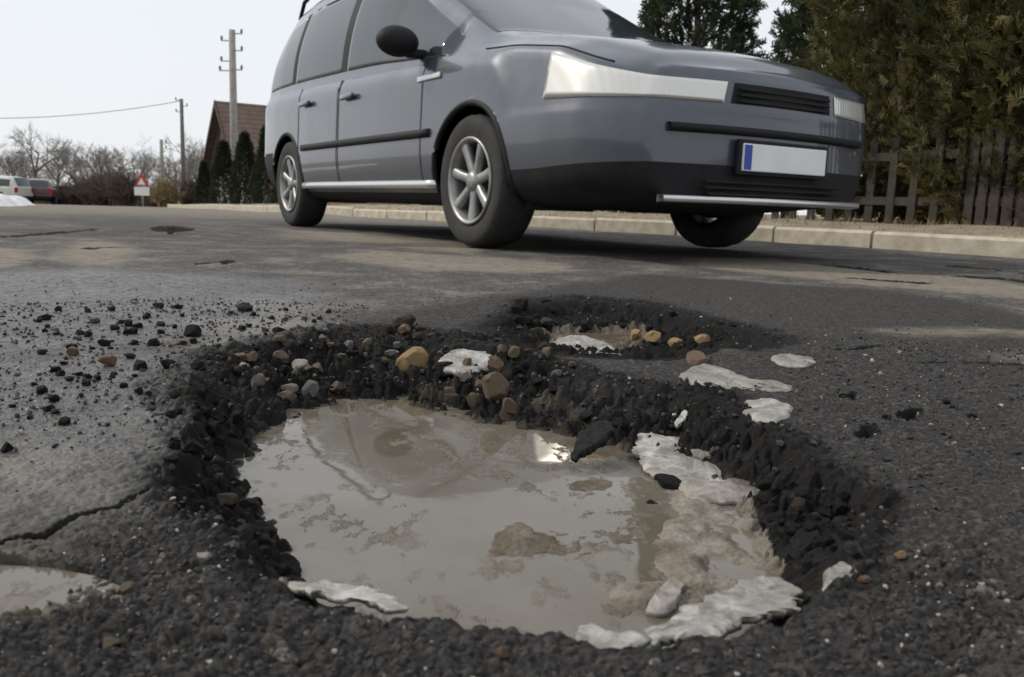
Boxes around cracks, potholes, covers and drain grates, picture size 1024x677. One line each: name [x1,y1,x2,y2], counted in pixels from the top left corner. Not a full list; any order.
pothole [154,326,885,653]
pothole [0,552,117,656]
crack [0,484,163,546]
crack [0,228,129,250]
crack [818,264,1024,284]
pothole [484,300,753,362]
